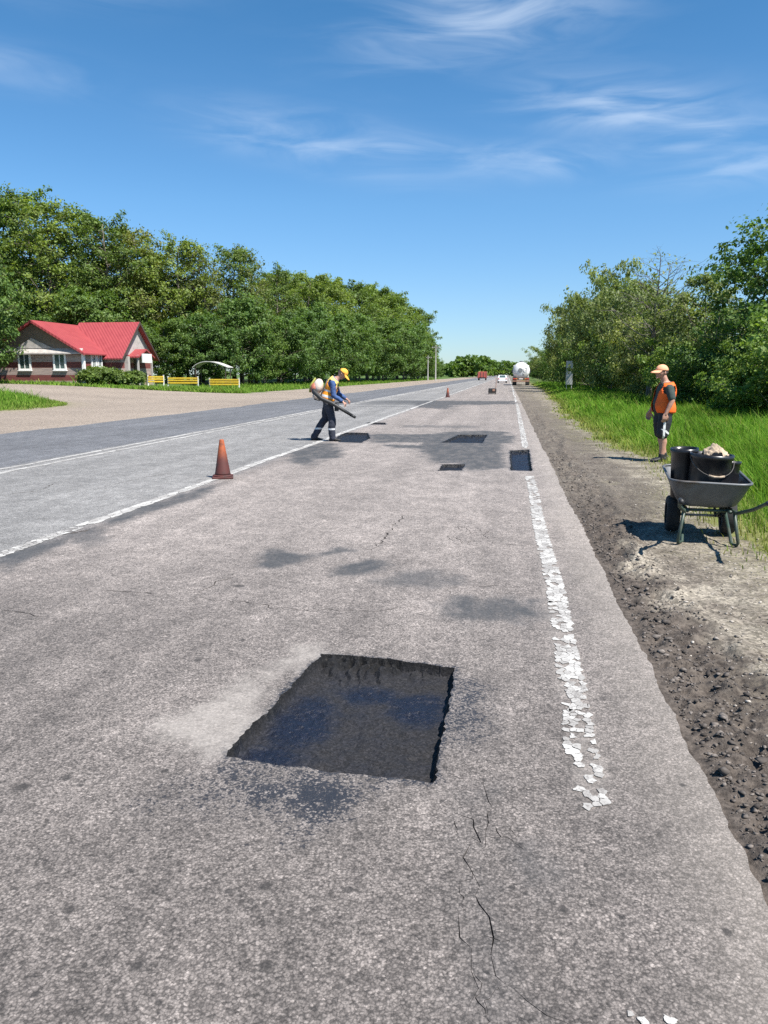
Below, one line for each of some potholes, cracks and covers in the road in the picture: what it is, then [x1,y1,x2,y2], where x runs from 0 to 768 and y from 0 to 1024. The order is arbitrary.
pothole [337,432,370,443]
crack [453,784,568,1024]
pothole [226,654,455,783]
pothole [509,449,533,471]
crack [371,514,405,553]
pothole [442,435,487,443]
